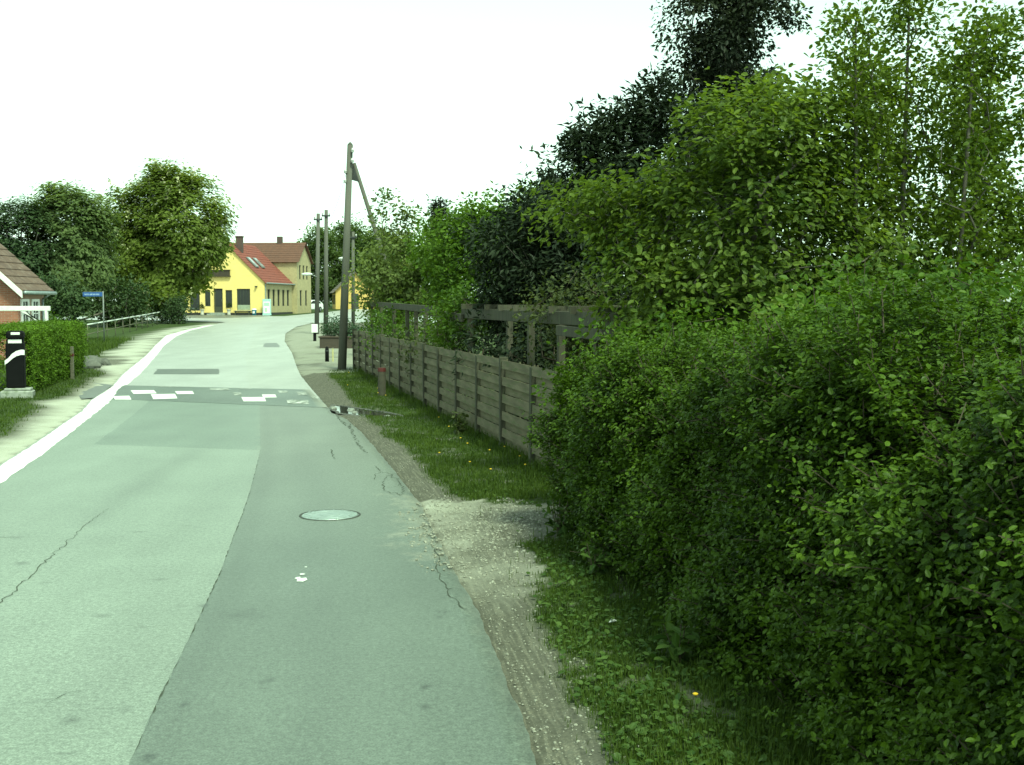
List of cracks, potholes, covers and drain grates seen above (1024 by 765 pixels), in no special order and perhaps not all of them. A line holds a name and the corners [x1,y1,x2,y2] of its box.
manhole cover [299,509,361,521]
pothole [329,404,401,417]
crack [434,548,466,609]
crack [337,415,405,495]
crack [0,509,107,603]
